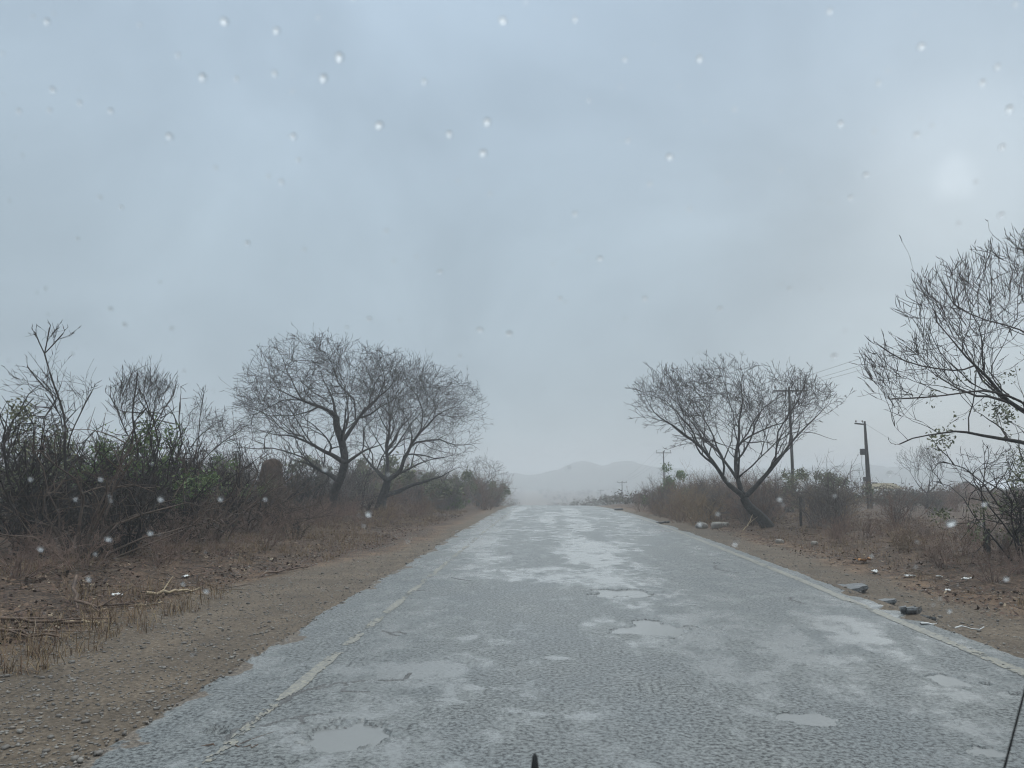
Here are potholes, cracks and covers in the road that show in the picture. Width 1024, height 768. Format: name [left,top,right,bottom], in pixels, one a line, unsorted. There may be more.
pothole [922,673,975,690]
pothole [603,619,703,640]
pothole [573,588,657,598]
pothole [959,744,1018,757]
pothole [282,717,402,755]
pothole [769,711,845,727]
